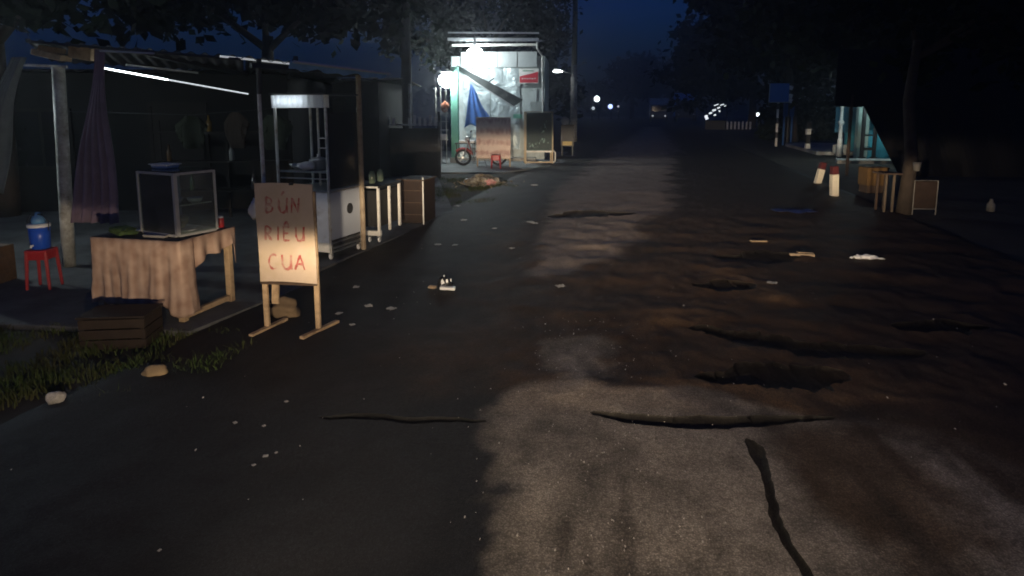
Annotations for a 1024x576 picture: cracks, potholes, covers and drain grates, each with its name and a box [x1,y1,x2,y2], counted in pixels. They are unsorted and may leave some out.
pothole [694,361,852,393]
pothole [688,324,929,360]
pothole [891,318,991,336]
crack [318,413,487,424]
crack [744,438,814,576]
pothole [692,279,757,292]
pothole [548,210,636,218]
